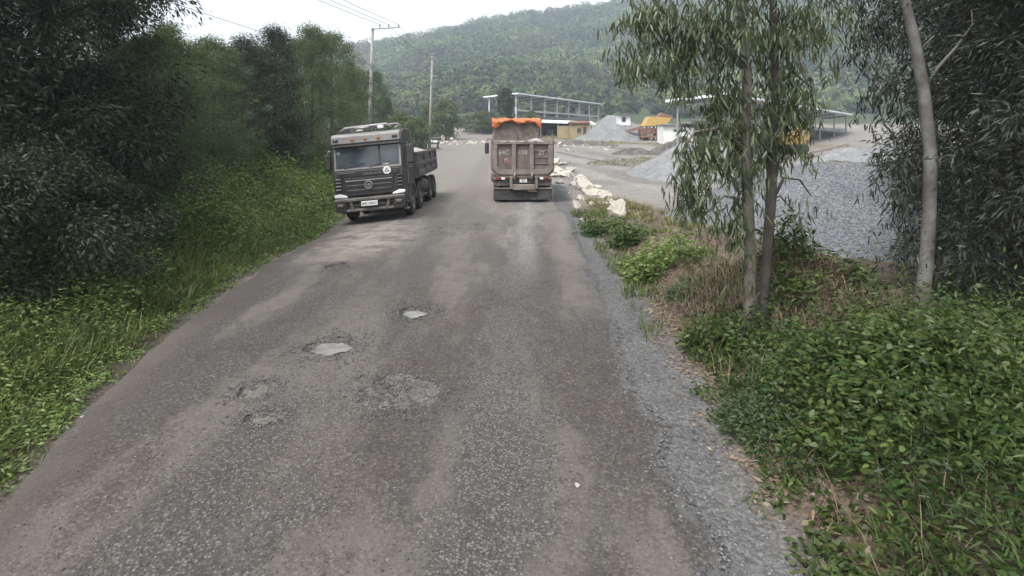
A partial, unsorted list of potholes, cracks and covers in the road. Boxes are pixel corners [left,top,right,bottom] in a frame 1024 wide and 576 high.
pothole [357,373,441,411]
pothole [399,306,440,320]
pothole [243,410,281,424]
pothole [302,336,358,357]
pothole [235,379,275,399]
